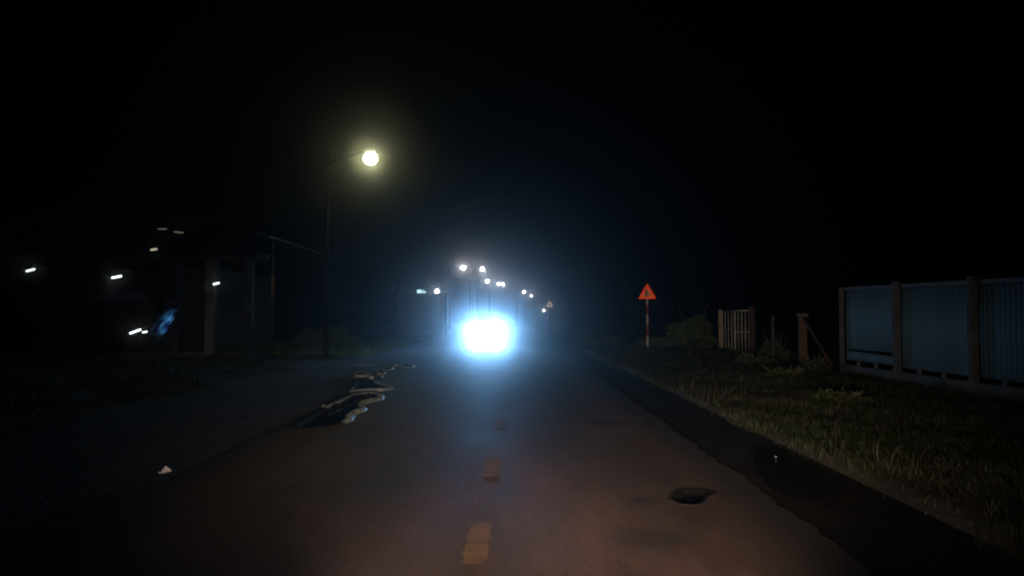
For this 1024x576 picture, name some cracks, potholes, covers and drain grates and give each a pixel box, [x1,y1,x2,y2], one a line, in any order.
pothole [289,392,385,429]
pothole [667,488,720,506]
pothole [346,378,395,393]
